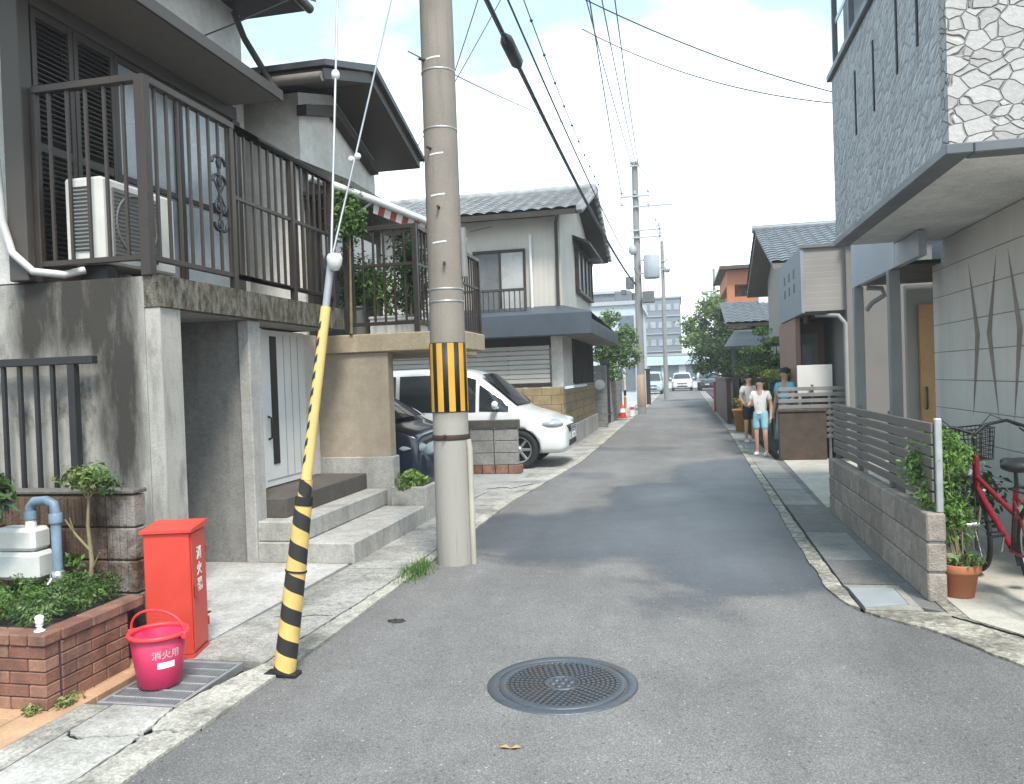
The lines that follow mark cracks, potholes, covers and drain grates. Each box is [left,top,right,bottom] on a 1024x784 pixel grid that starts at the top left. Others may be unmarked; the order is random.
manhole cover [487,657,638,716]
drain grate [97,660,243,709]
